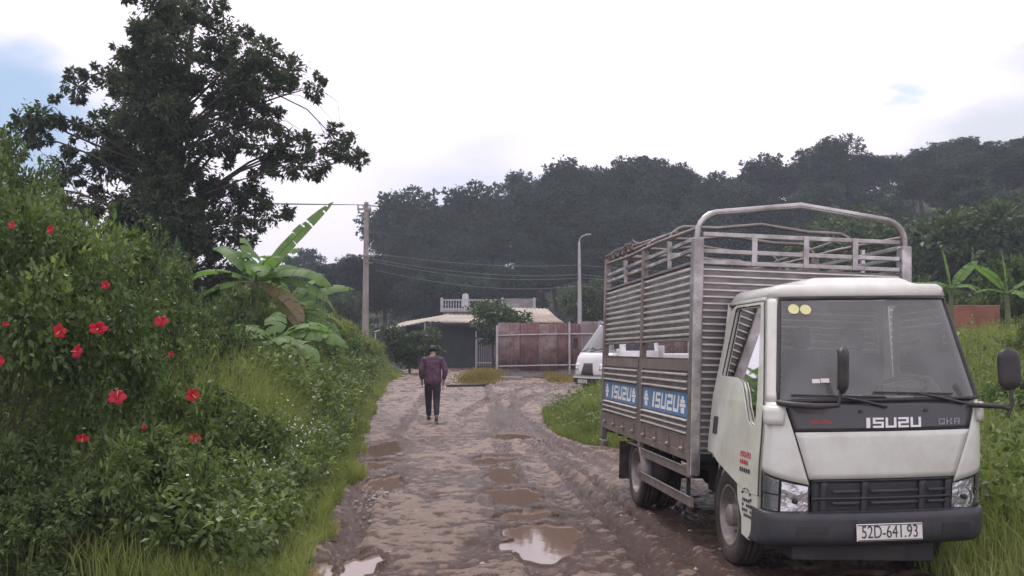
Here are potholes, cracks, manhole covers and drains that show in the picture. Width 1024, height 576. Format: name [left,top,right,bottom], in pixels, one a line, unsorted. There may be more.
pothole [478,462,523,489]
pothole [474,483,554,513]
pothole [355,470,411,496]
pothole [483,429,544,442]
pothole [358,437,409,458]
pothole [466,453,527,467]
pothole [332,549,393,576]
pothole [486,518,594,576]
